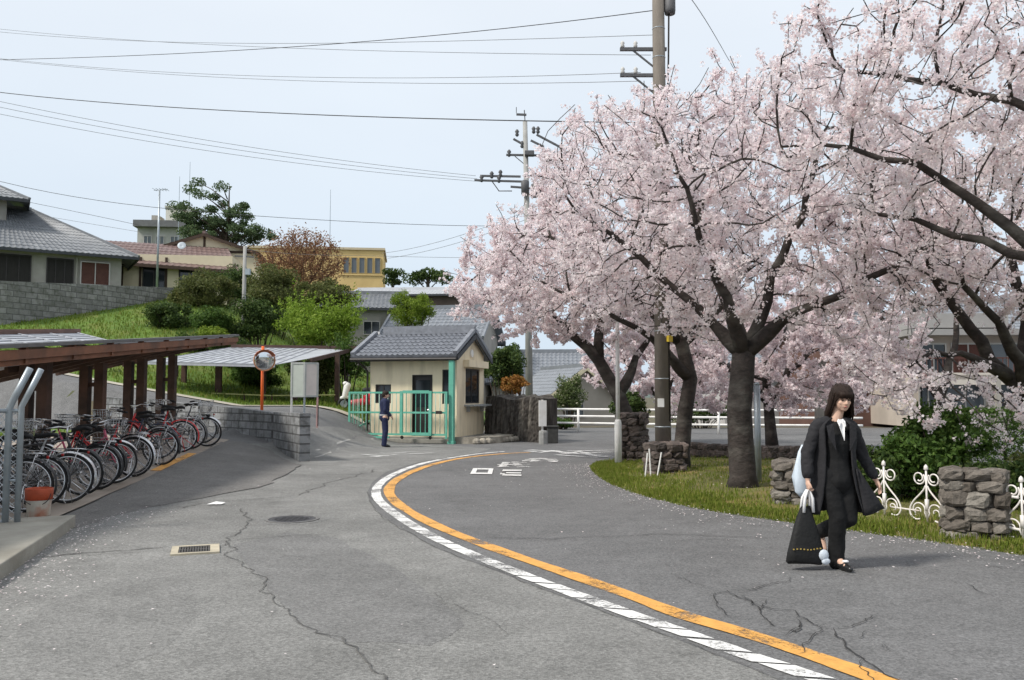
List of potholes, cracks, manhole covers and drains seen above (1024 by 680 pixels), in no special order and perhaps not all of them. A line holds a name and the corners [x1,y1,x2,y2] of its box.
crack [321,633,388,680]
drain grate [170,544,220,556]
crack [196,505,252,547]
crack [685,578,899,680]
manhole cover [265,515,319,523]
